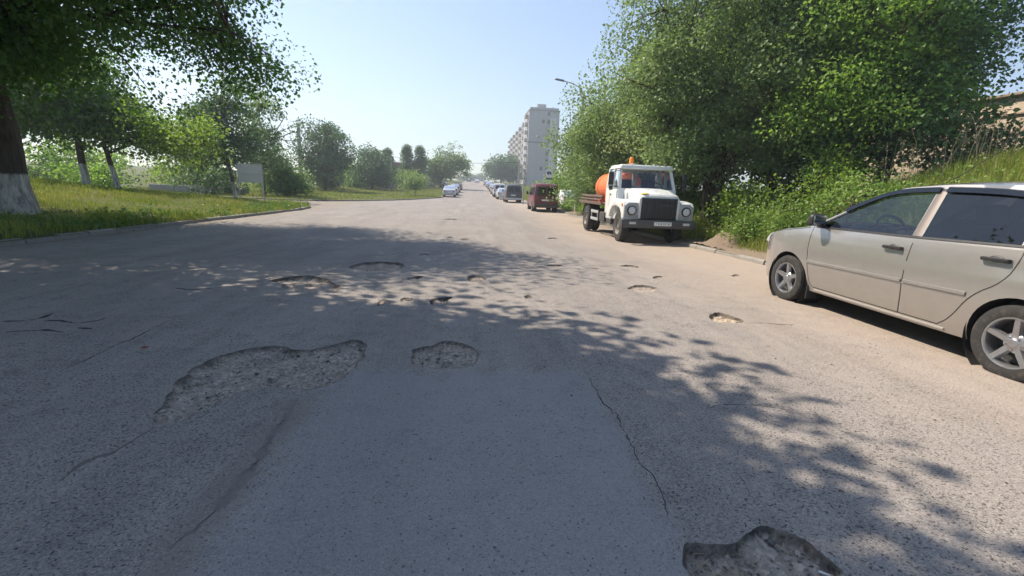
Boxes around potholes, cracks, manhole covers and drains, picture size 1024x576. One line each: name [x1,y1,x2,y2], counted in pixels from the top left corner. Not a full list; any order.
pothole [709,312,745,323]
crack [4,313,105,332]
pothole [429,297,453,305]
pothole [151,339,368,426]
pothole [349,262,404,271]
pothole [411,341,479,369]
pothole [682,526,845,576]
pothole [271,275,342,293]
crack [57,428,154,482]
